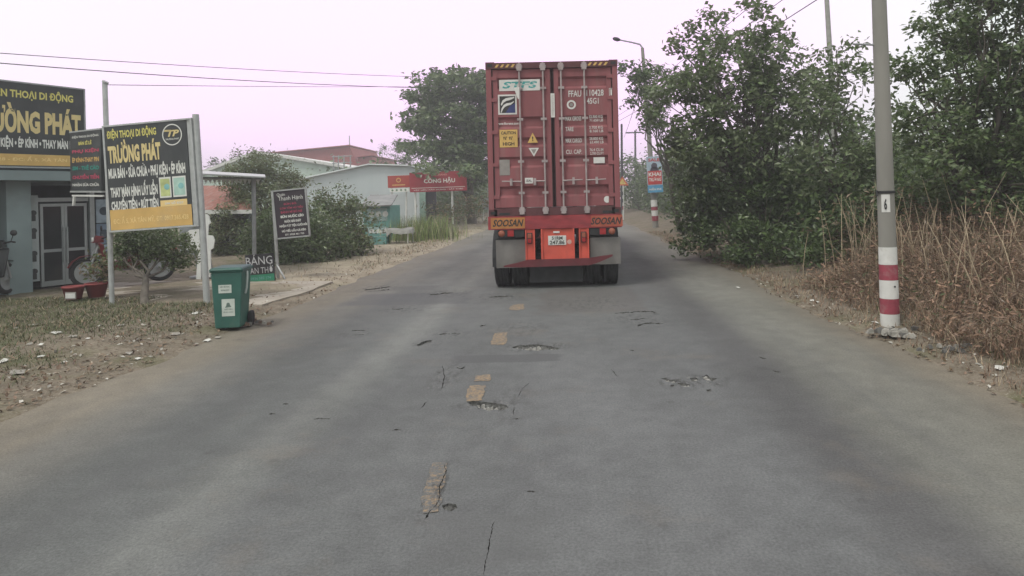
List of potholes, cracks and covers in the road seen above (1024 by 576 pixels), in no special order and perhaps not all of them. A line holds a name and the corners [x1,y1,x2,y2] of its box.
pothole [467,401,508,411]
pothole [661,374,717,392]
